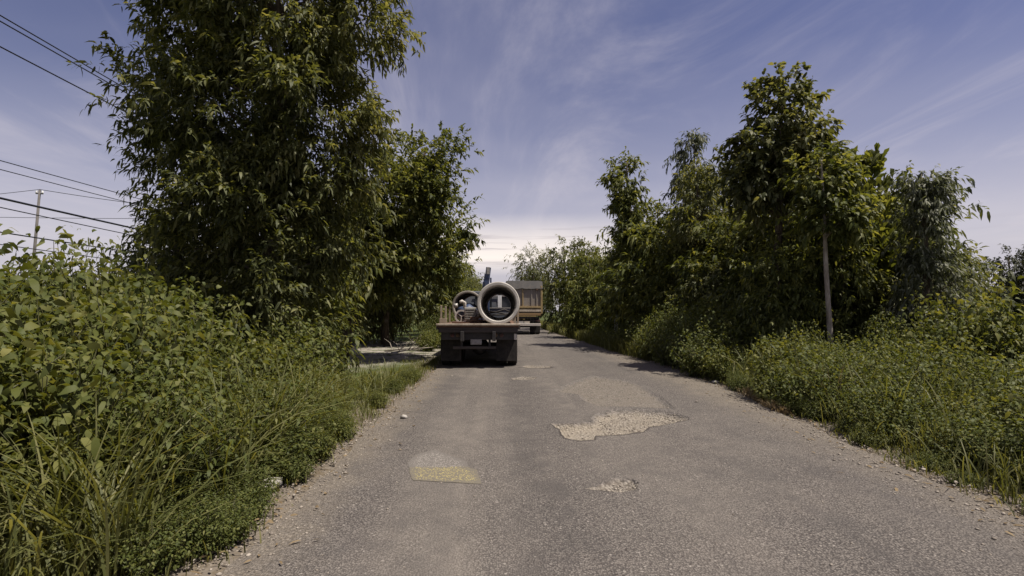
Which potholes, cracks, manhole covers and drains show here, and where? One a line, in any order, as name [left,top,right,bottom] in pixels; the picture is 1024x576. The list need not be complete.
pothole [585,478,639,492]
pothole [552,408,690,441]
